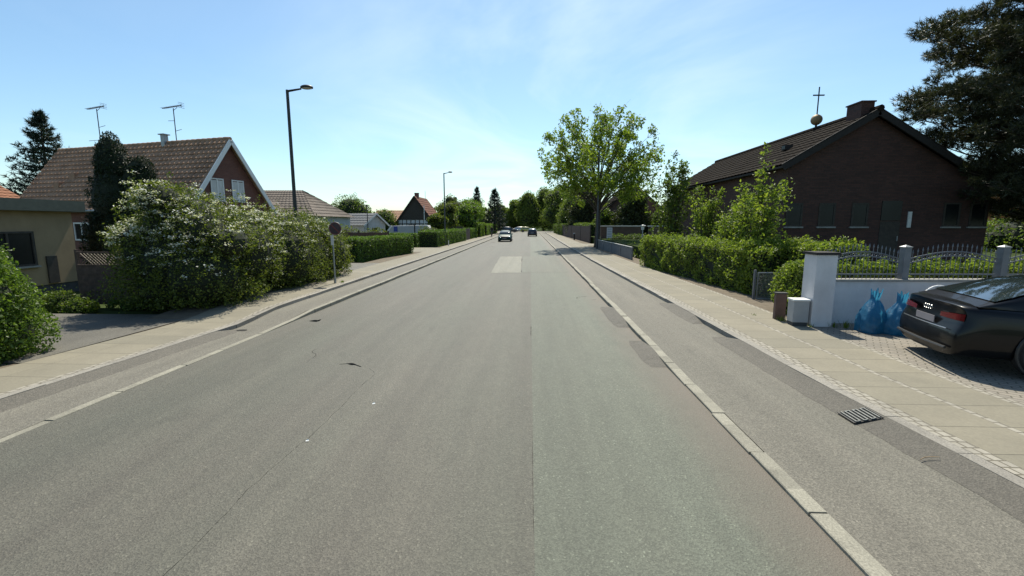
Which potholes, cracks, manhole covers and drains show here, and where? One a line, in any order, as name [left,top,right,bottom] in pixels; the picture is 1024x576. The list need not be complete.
drain grate [837,407,884,425]
crack [163,369,374,576]
